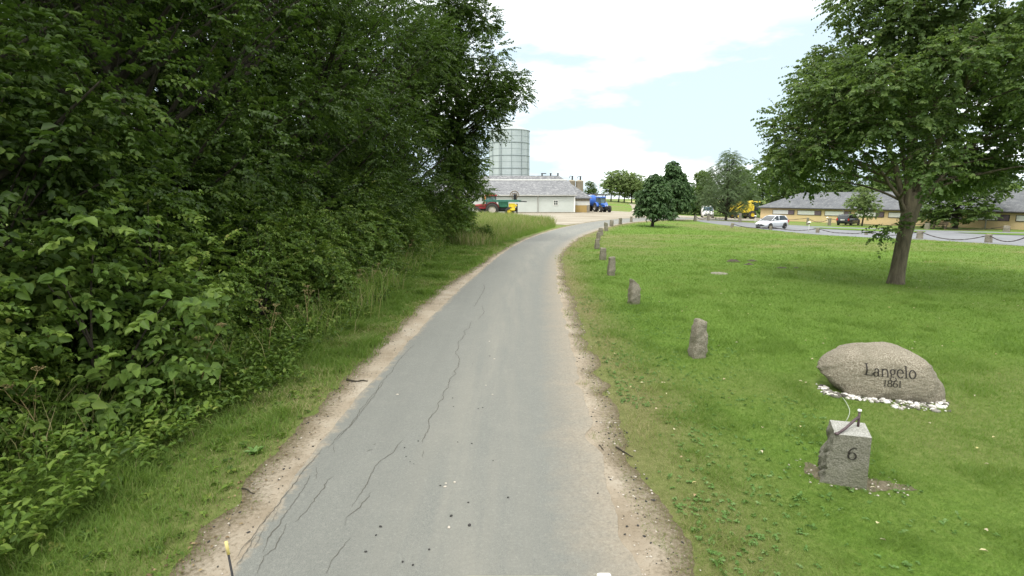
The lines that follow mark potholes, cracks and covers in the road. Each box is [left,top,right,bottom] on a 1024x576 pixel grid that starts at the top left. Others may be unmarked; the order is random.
crack [327,443,400,571]
crack [331,345,414,450]
crack [422,286,485,457]
